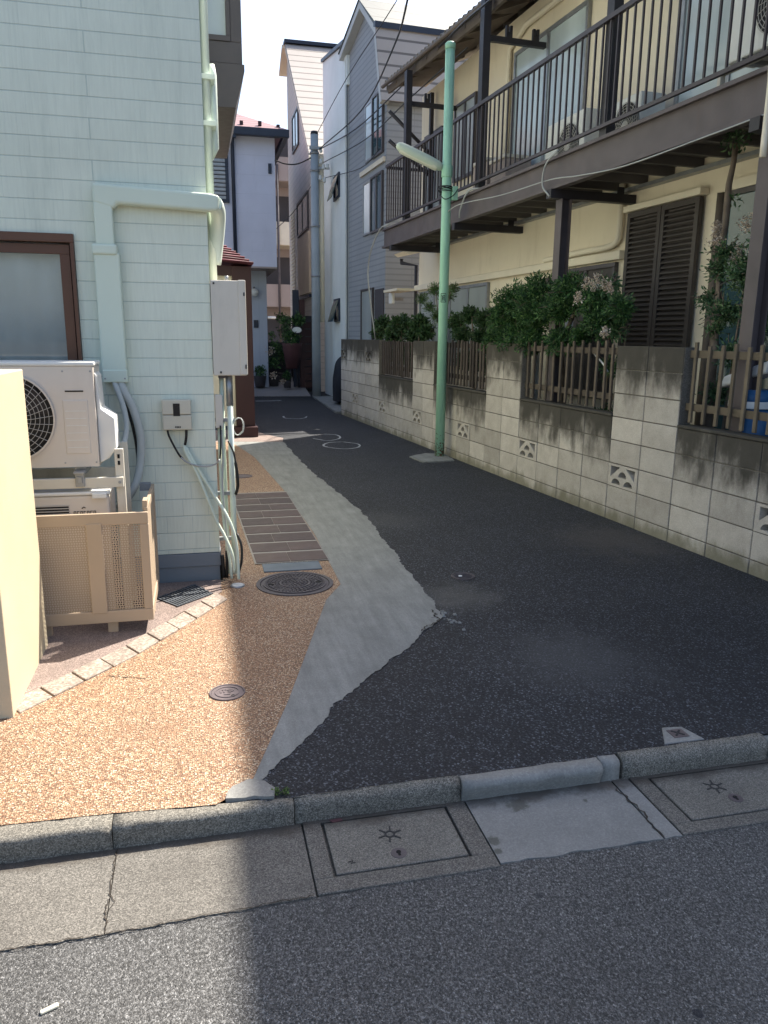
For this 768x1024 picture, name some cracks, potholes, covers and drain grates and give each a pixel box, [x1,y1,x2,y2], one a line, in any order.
manhole cover [256,571,333,596]
manhole cover [209,684,245,701]
crack [616,788,664,836]
drain grate [157,583,213,607]
manhole cover [302,801,500,897]
crack [0,849,312,951]
manhole cover [629,758,768,836]
manhole cover [451,572,475,580]
